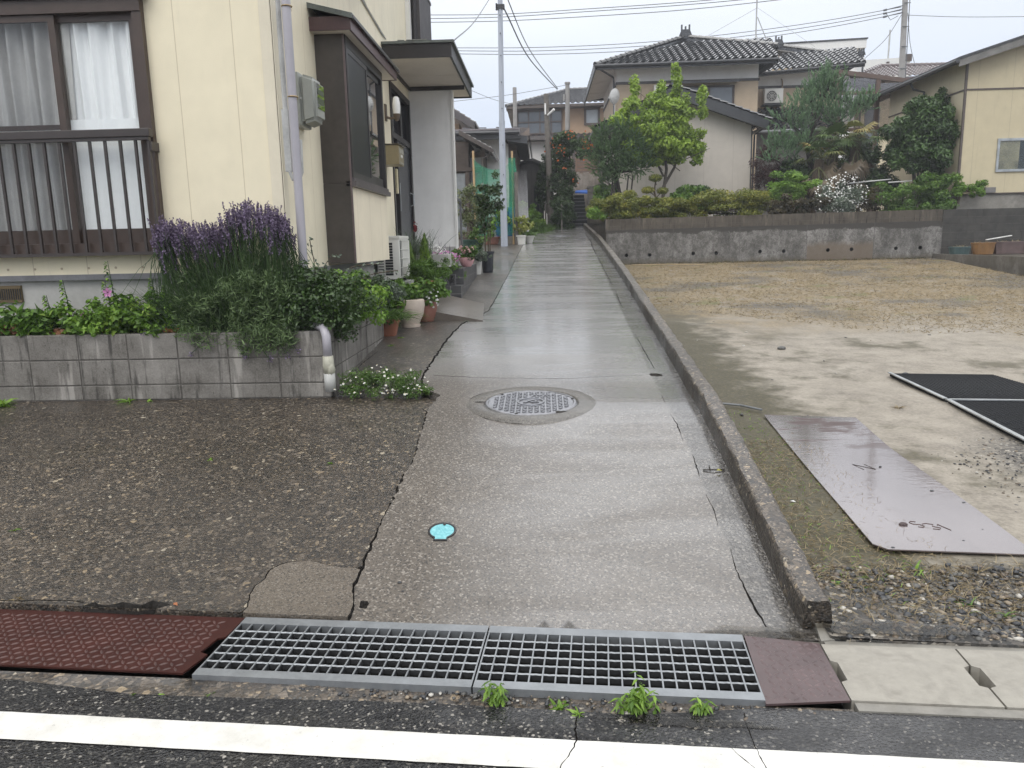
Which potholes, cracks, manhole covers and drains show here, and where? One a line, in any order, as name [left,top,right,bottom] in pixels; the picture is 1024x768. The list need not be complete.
crack [560,718,578,768]
manhole cover [466,386,596,424]
drain grate [473,626,766,707]
crack [661,395,767,627]
drain grate [192,617,489,695]
utility cover [428,522,456,541]
